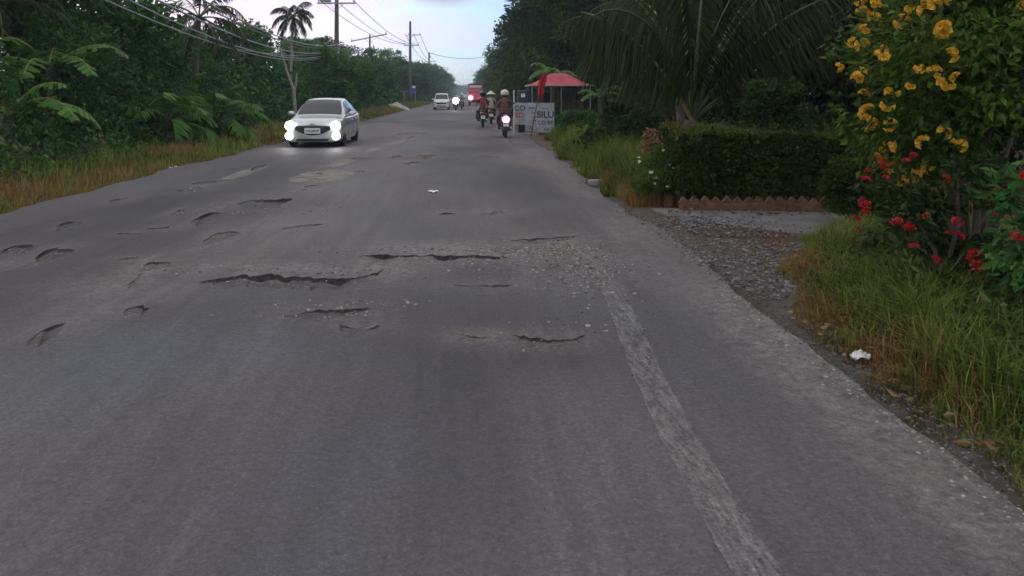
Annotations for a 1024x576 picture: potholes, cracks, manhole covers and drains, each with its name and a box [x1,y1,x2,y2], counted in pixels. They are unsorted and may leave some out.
pothole [140,262,173,273]
pothole [26,323,66,348]
pothole [35,247,75,263]
pothole [203,231,241,246]
pothole [237,198,293,209]
pothole [0,245,35,255]
pothole [190,212,228,227]
pothole [123,305,150,320]
pothole [357,254,510,263]
pothole [512,335,586,349]
pothole [55,221,83,232]
pothole [199,270,383,291]
